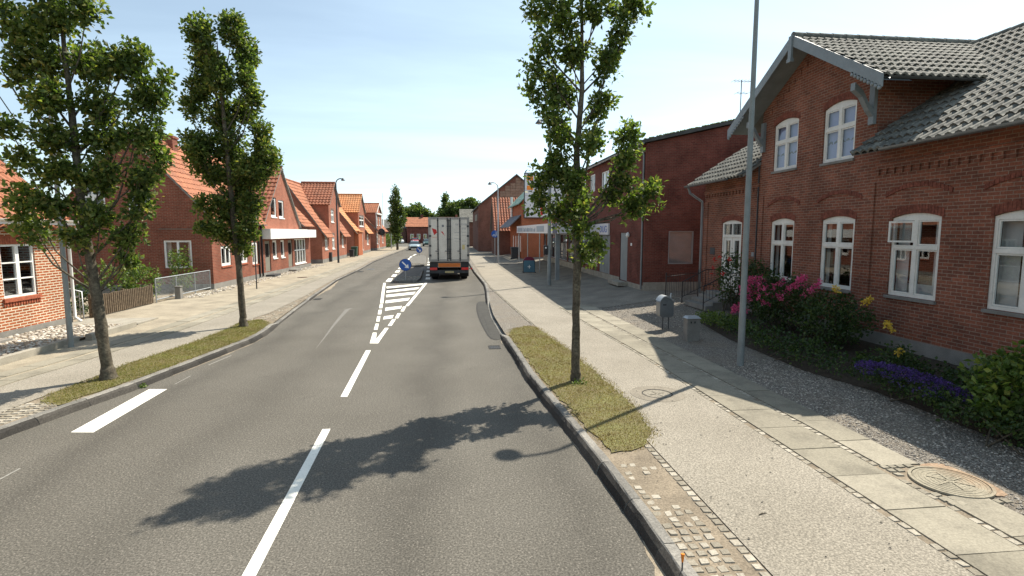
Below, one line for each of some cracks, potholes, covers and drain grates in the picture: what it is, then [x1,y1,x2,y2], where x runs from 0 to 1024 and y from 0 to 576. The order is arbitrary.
manhole cover [630,386,685,402]
manhole cover [879,463,1013,507]
